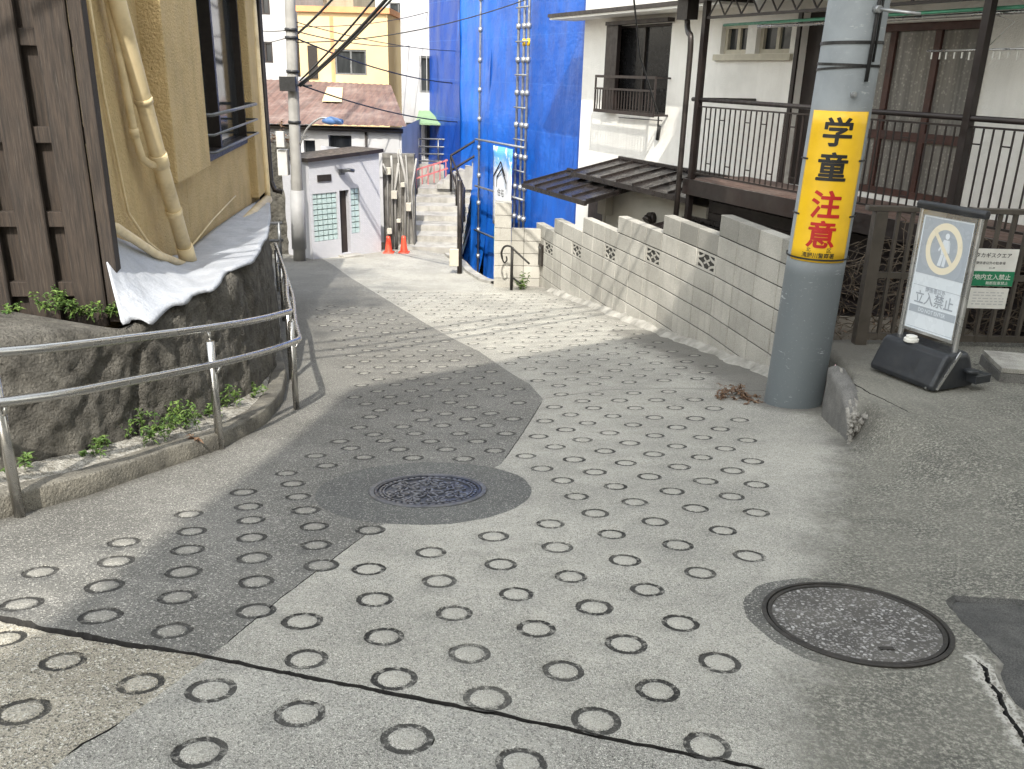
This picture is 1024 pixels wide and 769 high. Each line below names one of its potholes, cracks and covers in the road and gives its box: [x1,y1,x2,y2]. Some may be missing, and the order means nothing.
crack [969,656,1024,752]
manhole cover [762,582,956,669]
manhole cover [368,474,487,508]
crack [64,720,123,759]
